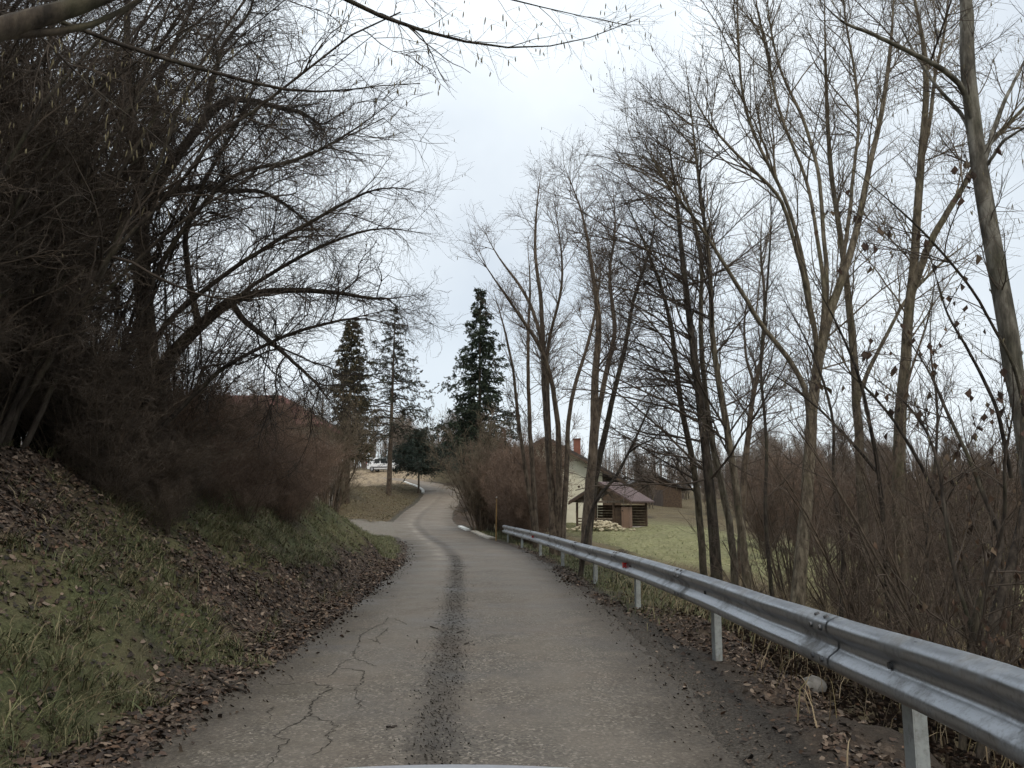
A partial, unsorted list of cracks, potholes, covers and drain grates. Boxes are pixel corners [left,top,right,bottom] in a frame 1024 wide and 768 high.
crack [266,617,406,767]
